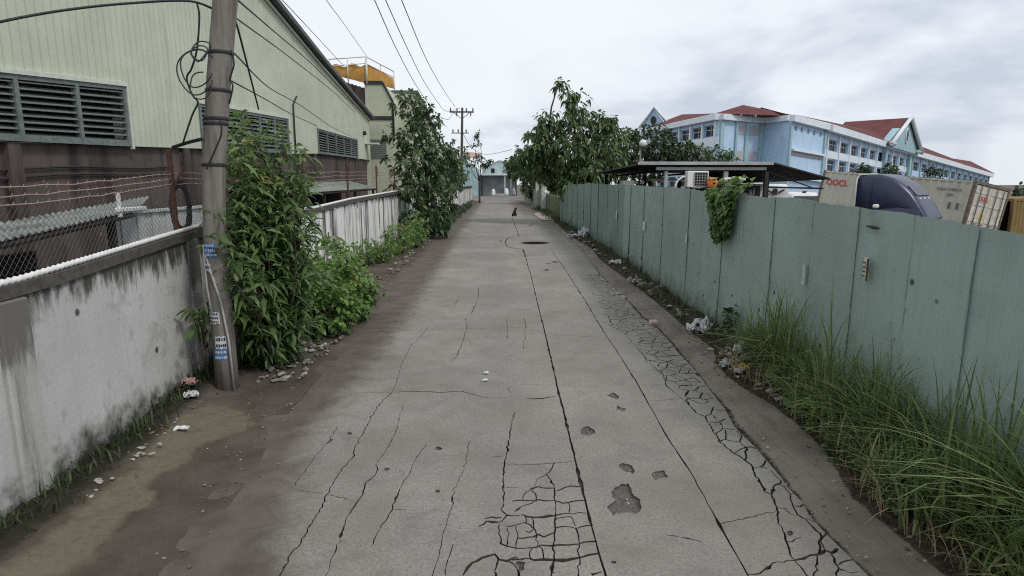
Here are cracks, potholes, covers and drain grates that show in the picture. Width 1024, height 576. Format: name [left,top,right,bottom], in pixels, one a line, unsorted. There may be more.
crack [279,221,858,576]
pothole [607,483,642,516]
